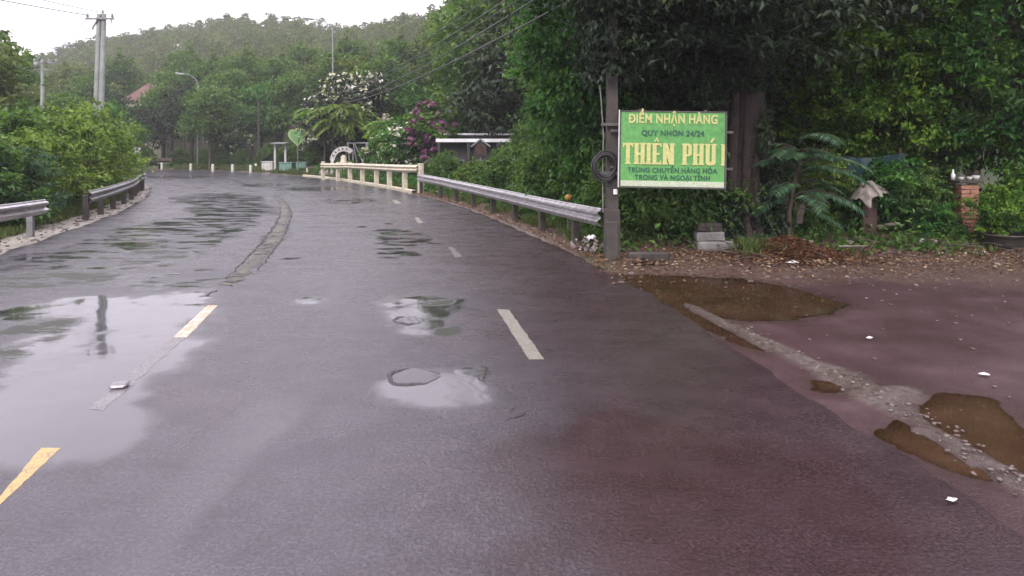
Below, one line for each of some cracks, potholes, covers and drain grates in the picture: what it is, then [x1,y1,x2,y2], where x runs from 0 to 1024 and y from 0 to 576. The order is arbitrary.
pothole [391,316,425,325]
pothole [387,368,441,386]
